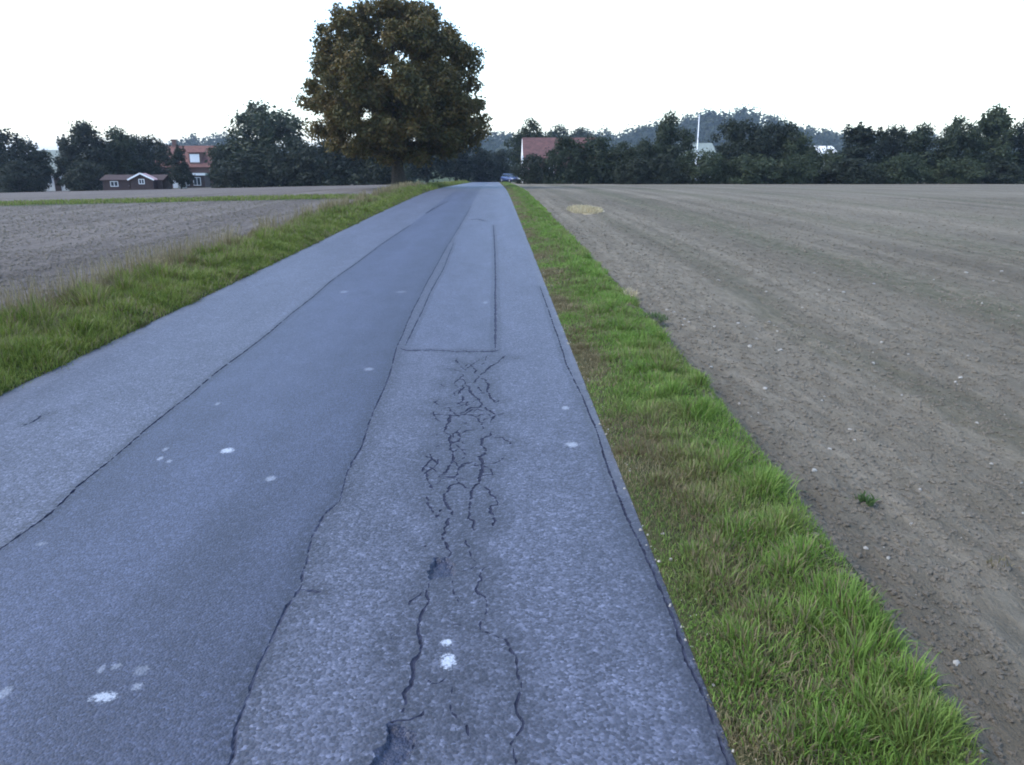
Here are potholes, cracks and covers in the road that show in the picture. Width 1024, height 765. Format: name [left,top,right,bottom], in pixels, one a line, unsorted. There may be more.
pothole [427,557,457,582]
crack [386,350,525,765]
pothole [369,722,419,765]
